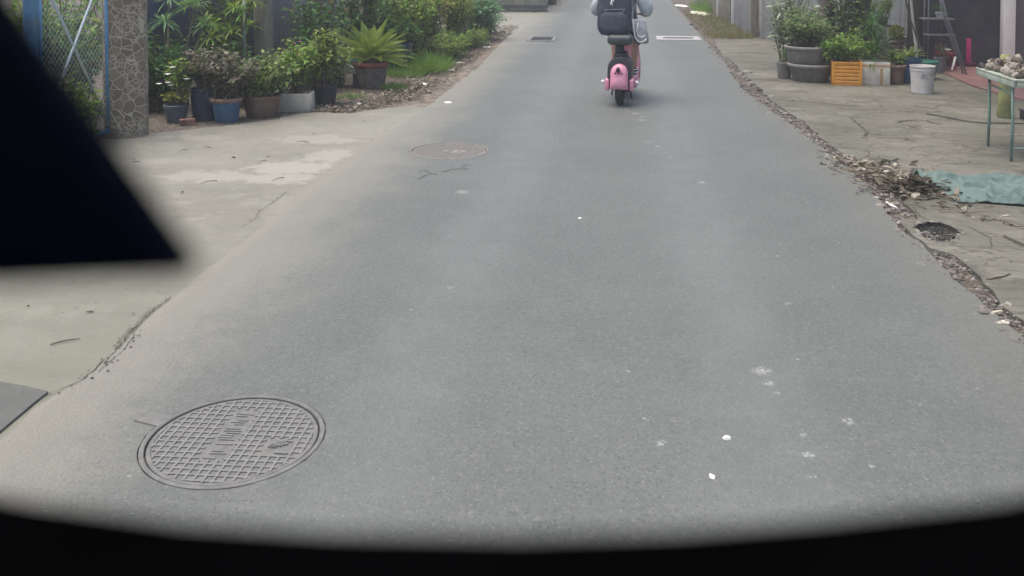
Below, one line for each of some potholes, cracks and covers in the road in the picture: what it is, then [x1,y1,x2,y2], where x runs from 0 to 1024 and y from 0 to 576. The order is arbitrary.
pothole [913,220,964,243]
crack [45,296,171,397]
manhole cover [409,142,489,159]
manhole cover [134,395,325,490]
